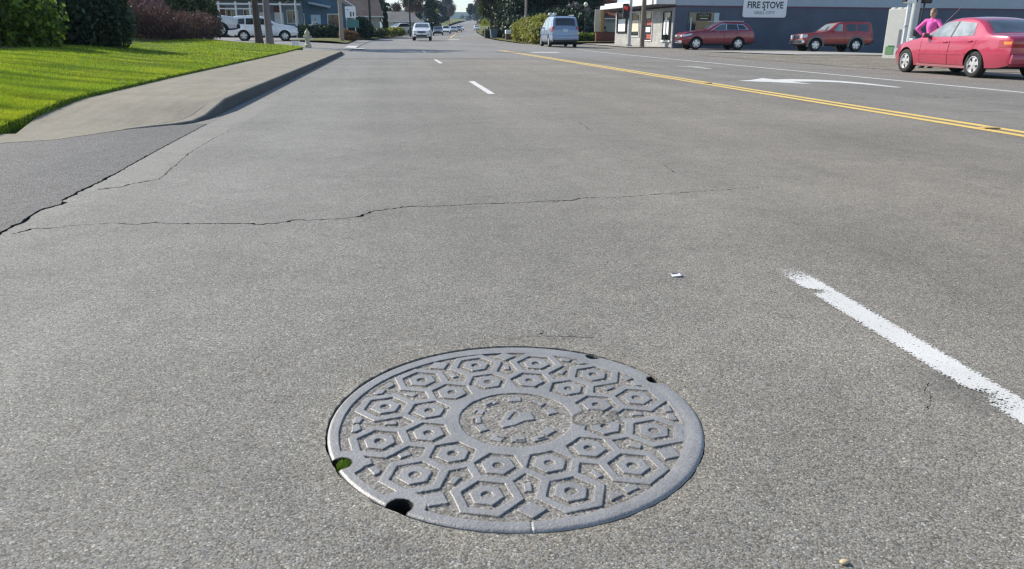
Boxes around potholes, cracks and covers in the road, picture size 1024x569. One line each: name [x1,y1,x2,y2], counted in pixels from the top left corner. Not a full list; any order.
manhole cover [327,348,704,535]
crack [0,116,771,235]
